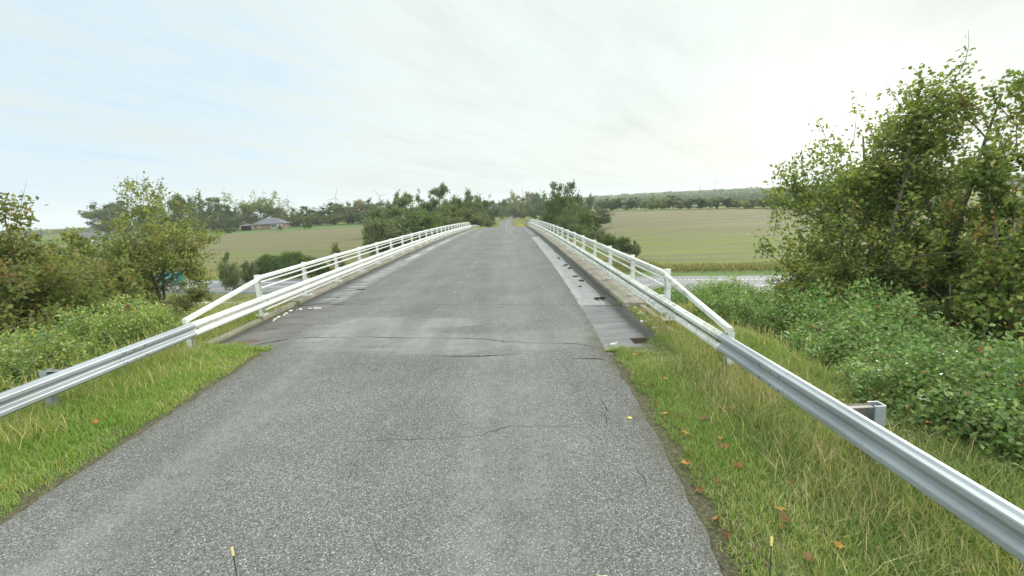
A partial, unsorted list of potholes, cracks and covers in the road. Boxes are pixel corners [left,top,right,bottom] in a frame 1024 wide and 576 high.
crack [257,328,596,359]
